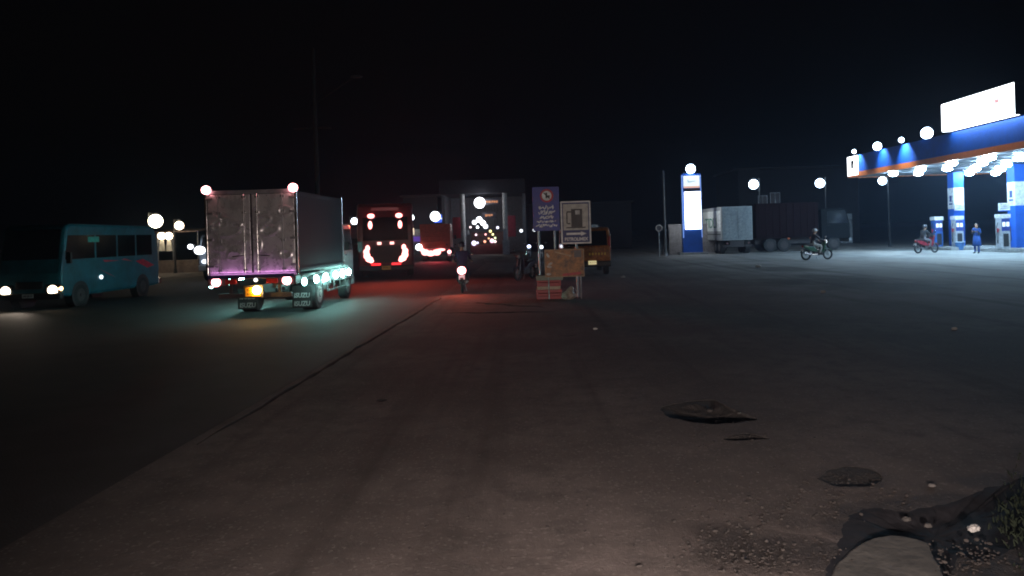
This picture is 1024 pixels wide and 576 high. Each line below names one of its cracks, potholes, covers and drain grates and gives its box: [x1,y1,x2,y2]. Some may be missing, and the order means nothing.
pothole [817,466,883,487]
pothole [724,433,770,441]
pothole [825,477,1024,576]
pothole [660,400,757,424]
